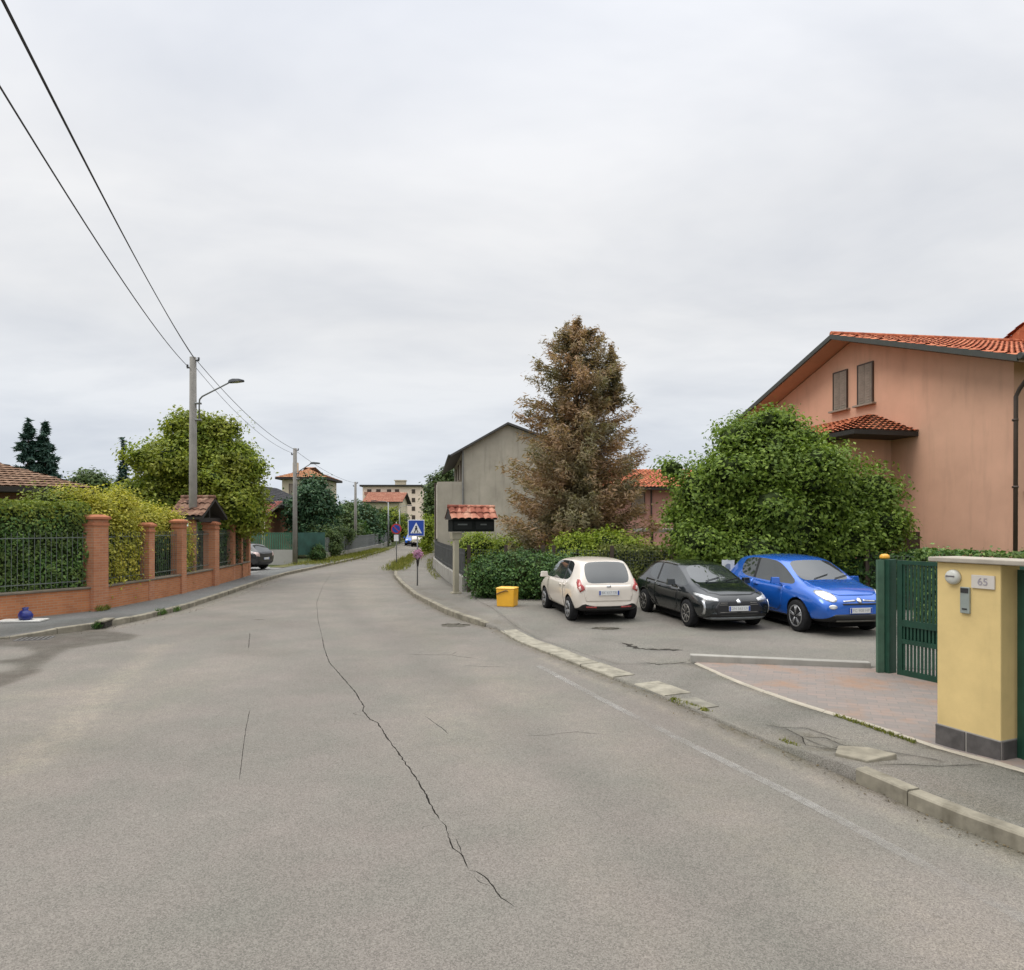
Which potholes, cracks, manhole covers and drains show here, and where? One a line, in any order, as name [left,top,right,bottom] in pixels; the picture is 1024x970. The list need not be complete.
crack [623,643,684,665]
crack [317,579,512,905]
crack [768,725,938,760]
